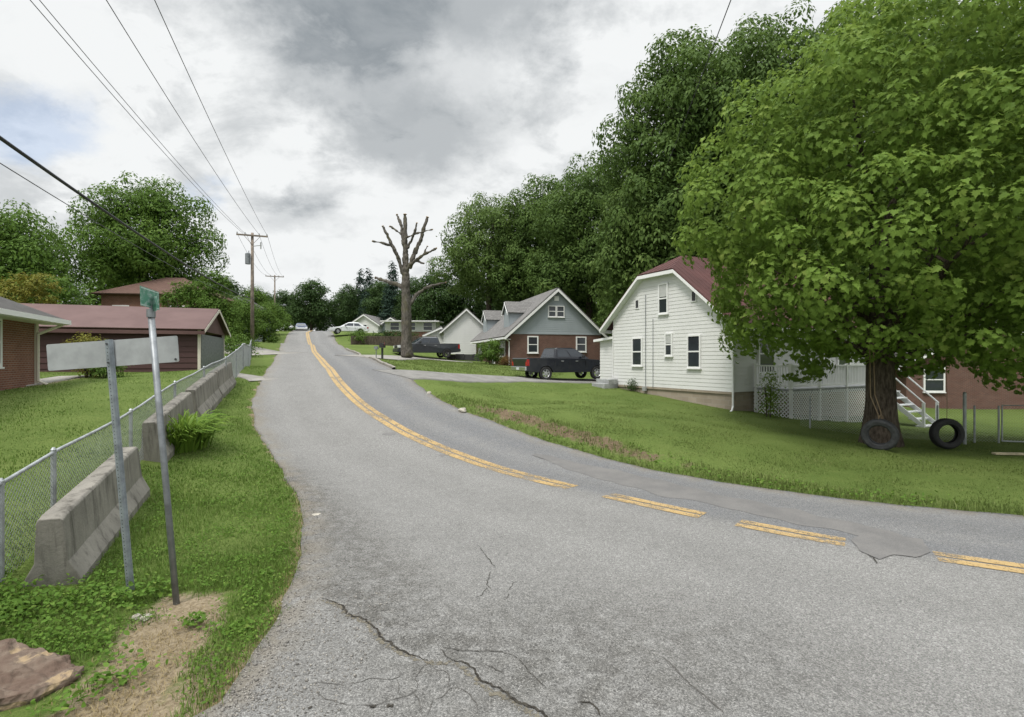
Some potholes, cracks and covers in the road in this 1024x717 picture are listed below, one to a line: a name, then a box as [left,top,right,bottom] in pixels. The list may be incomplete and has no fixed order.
crack [664,658,724,713]
crack [479,546,523,599]
crack [308,598,548,717]
